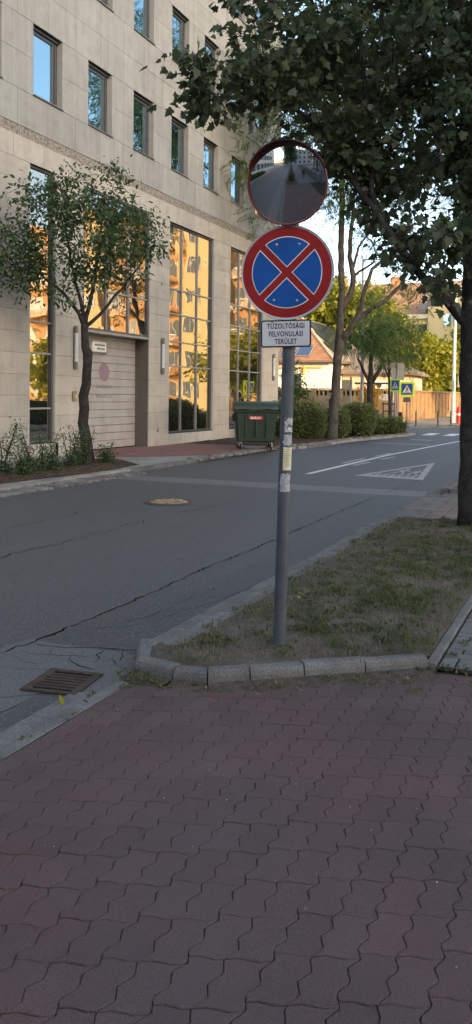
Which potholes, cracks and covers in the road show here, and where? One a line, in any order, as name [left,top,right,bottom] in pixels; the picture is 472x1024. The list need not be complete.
drain grate [20,668,103,695]
manhole cover [143,498,196,506]
crack [0,480,417,713]
